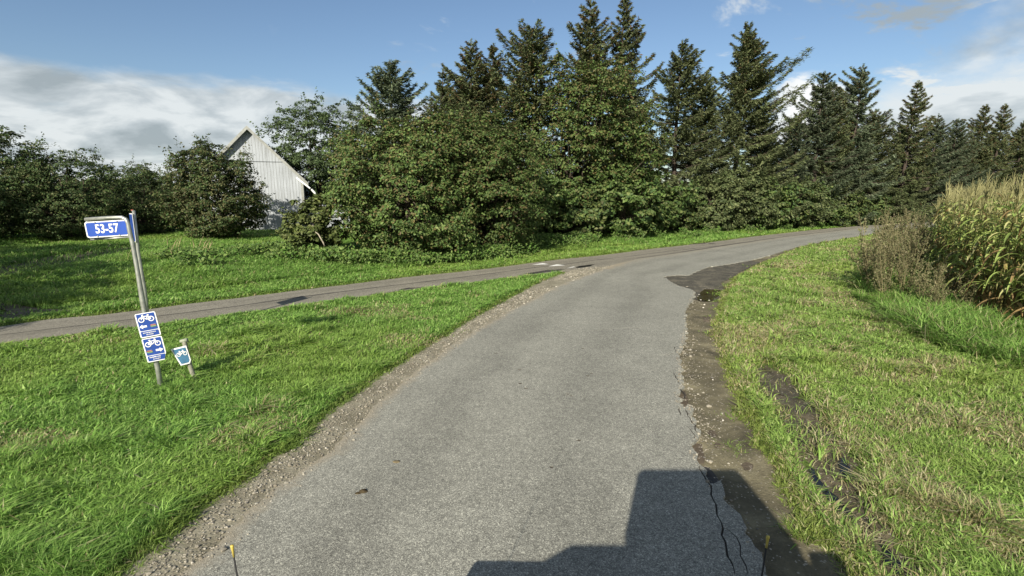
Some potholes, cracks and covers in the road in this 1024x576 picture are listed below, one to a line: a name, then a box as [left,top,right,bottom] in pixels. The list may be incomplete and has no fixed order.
crack [674,374,697,438]
crack [699,467,748,574]
